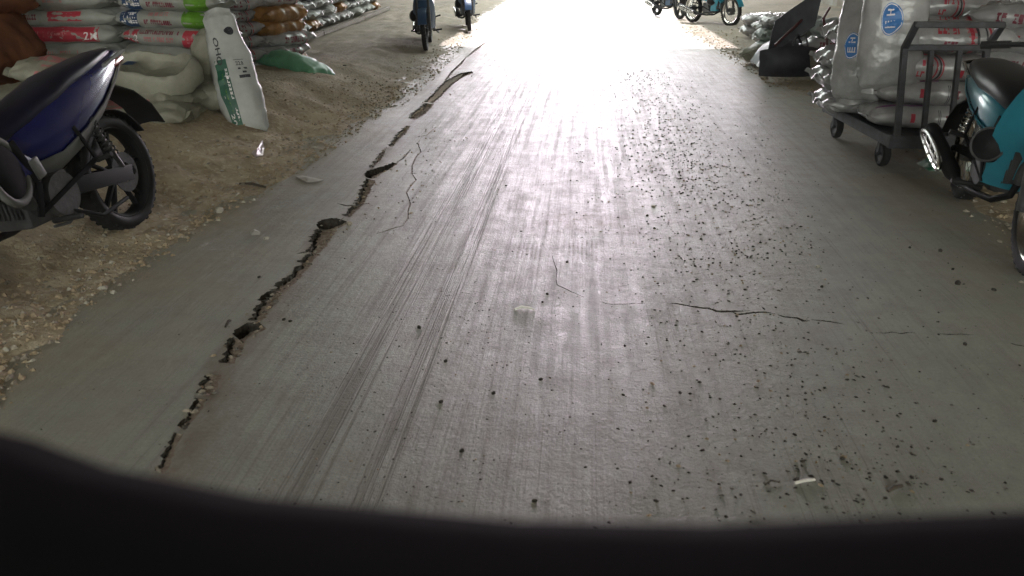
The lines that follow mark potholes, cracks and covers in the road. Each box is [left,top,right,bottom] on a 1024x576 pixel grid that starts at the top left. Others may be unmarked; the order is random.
crack [670,303,974,335]
crack [154,40,489,473]
